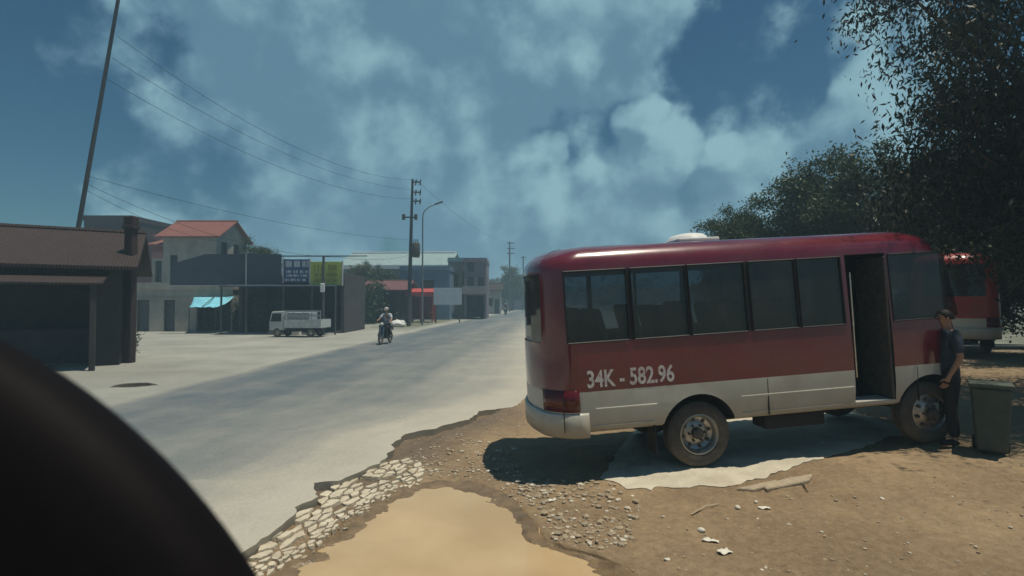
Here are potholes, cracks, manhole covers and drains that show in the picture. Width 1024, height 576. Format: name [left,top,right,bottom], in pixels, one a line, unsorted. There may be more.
pothole [258,480,635,576]
